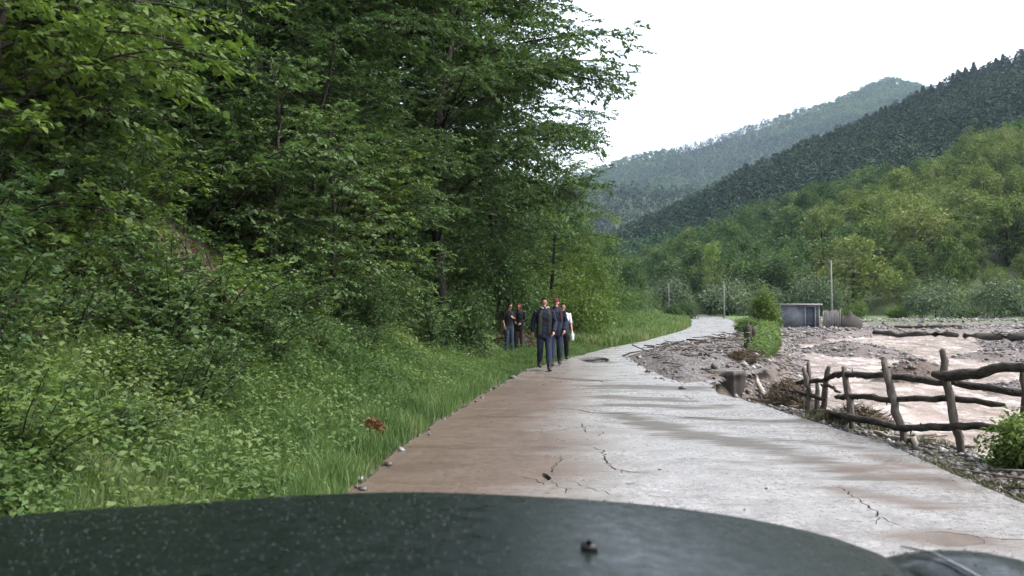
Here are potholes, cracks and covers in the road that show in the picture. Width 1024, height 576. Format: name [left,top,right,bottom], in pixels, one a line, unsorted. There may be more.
crack [525,395,799,495]
crack [837,486,918,529]
